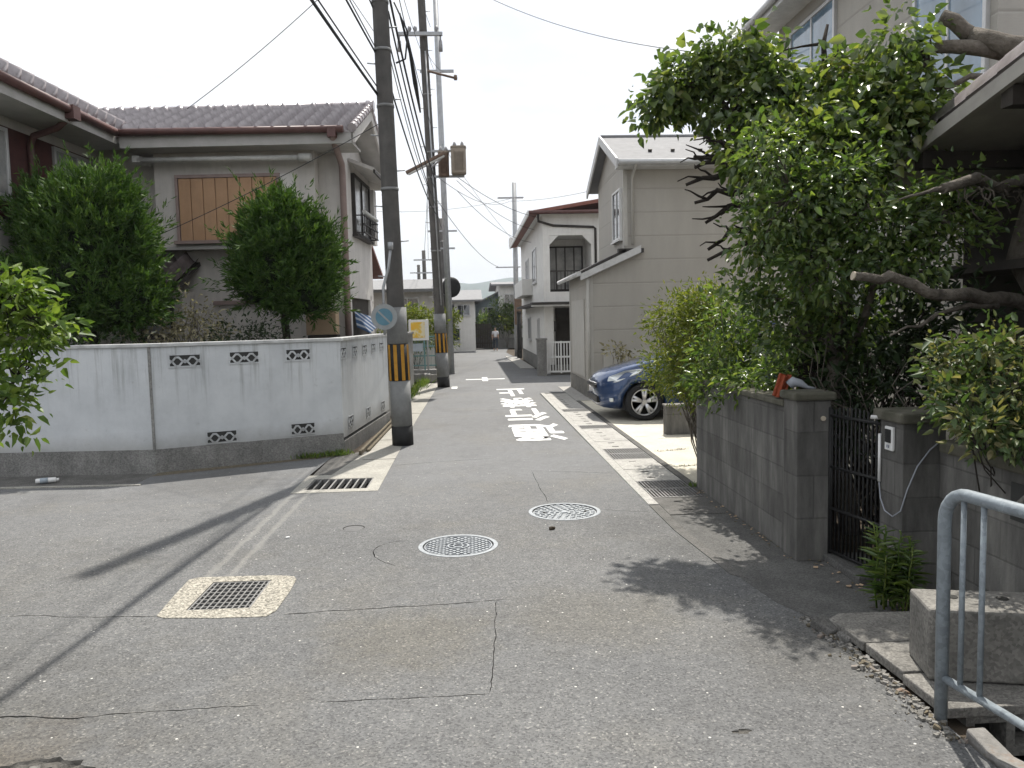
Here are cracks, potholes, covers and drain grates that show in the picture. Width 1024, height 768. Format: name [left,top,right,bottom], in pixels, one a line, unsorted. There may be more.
drain grate [636,480,691,489]
manhole cover [529,503,601,520]
drain grate [644,488,703,498]
drain grate [157,575,296,619]
manhole cover [418,534,498,557]
drain grate [290,473,387,494]
pothole [0,757,96,768]
